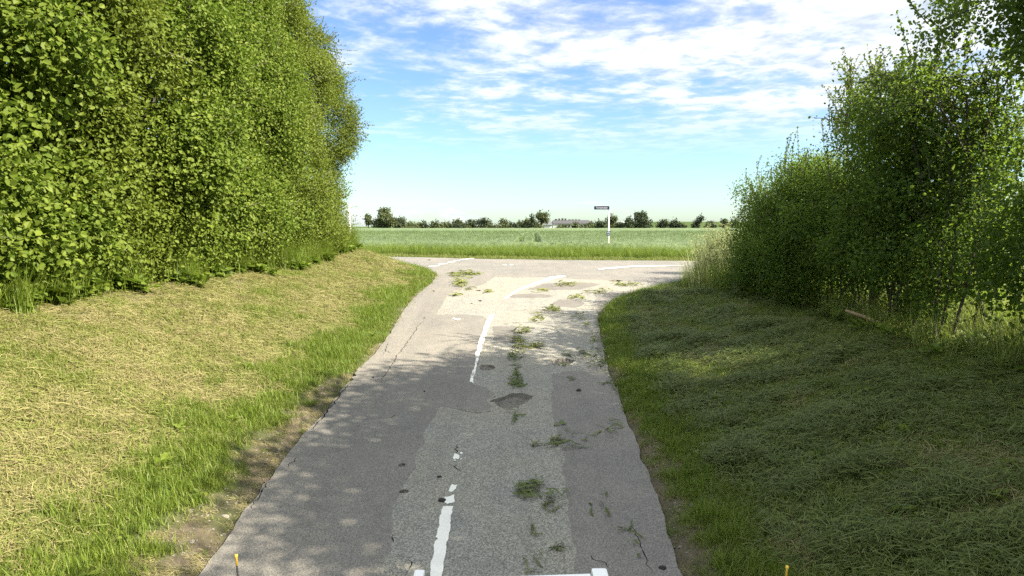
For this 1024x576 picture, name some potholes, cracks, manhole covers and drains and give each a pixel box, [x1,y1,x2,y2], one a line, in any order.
crack [311,383,350,430]
pothole [489,393,533,409]
crack [380,318,425,381]
